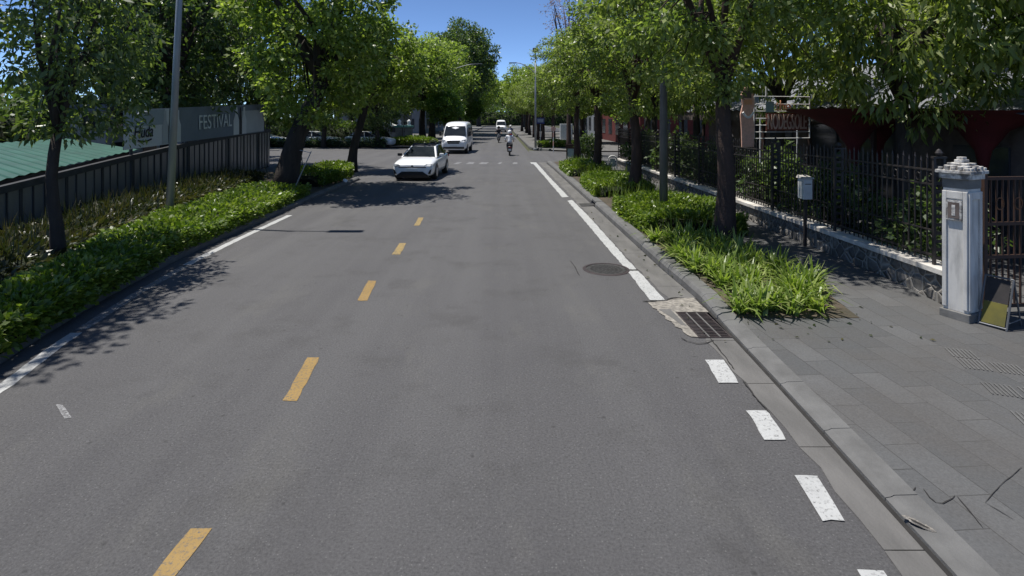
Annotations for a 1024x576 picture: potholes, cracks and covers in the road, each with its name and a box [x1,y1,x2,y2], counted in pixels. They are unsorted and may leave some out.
crack [913,467,1022,526]
drain grate [676,312,733,341]
manhole cover [583,263,630,276]
